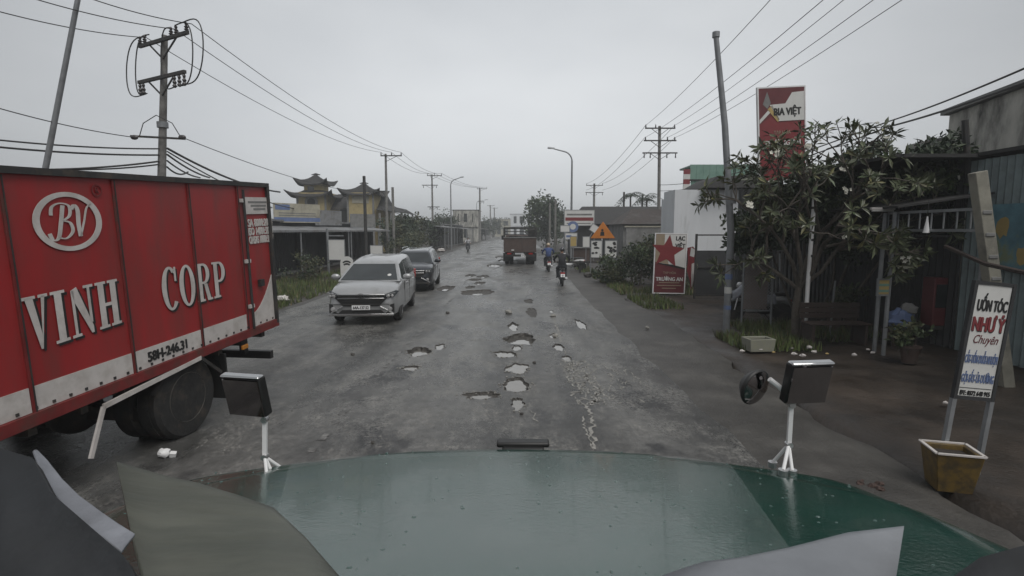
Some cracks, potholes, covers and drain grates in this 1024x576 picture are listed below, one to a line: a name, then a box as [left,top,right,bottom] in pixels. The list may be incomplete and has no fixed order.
pothole [405,347,433,357]
crack [560,350,651,451]
pothole [492,350,518,358]
pothole [498,375,534,393]
pothole [510,397,526,412]
pothole [504,362,530,375]
pothole [456,390,502,399]
pothole [502,332,537,346]
